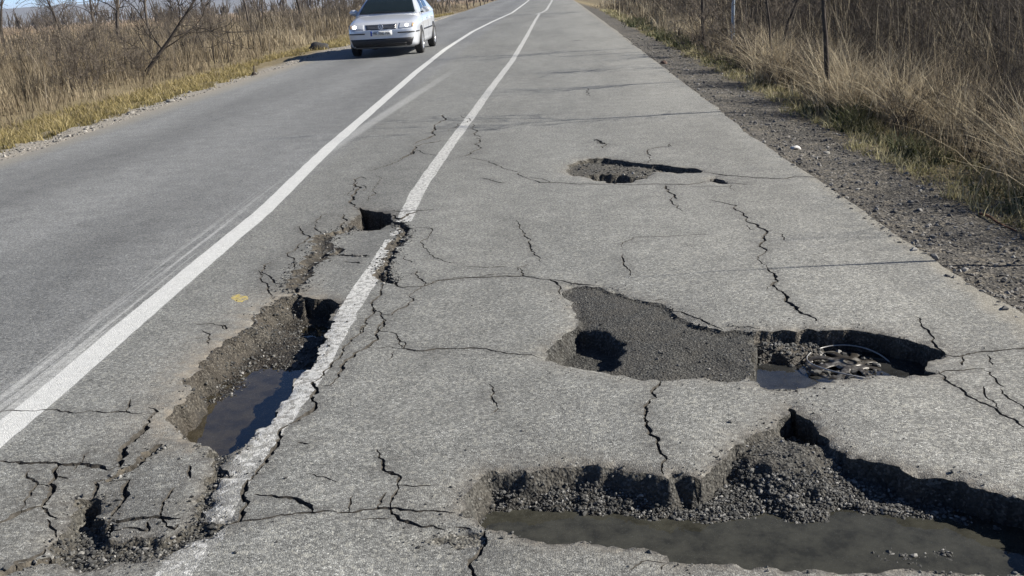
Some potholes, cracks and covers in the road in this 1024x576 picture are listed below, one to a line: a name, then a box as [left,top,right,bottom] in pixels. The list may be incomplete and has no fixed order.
crack [655,299,757,329]
crack [643,383,670,474]
pothole [346,208,397,231]
pothole [509,284,762,400]
crack [197,323,228,344]
